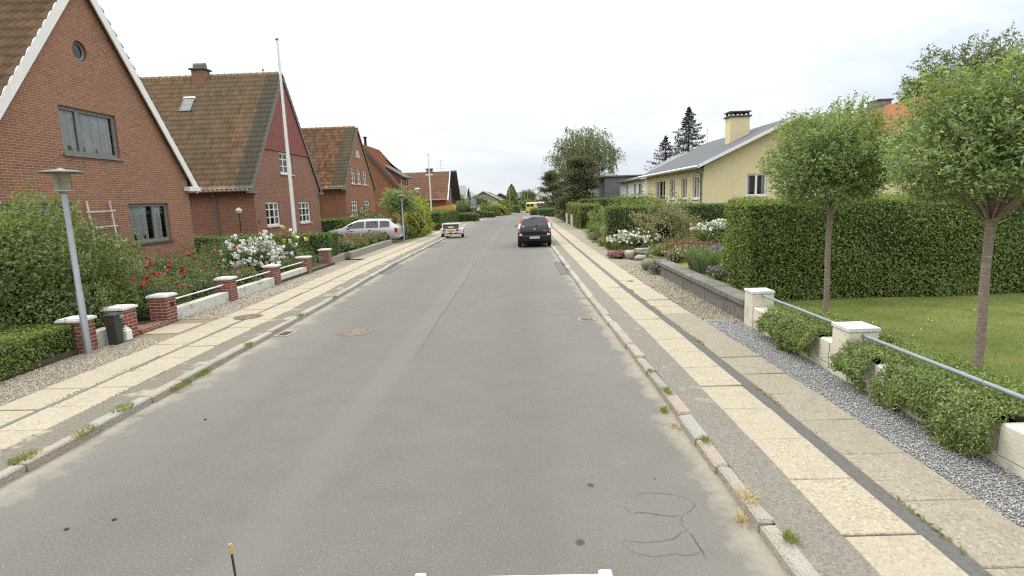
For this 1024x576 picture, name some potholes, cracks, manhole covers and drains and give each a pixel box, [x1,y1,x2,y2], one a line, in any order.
crack [625,492,705,557]
manhole cover [338,328,373,336]
